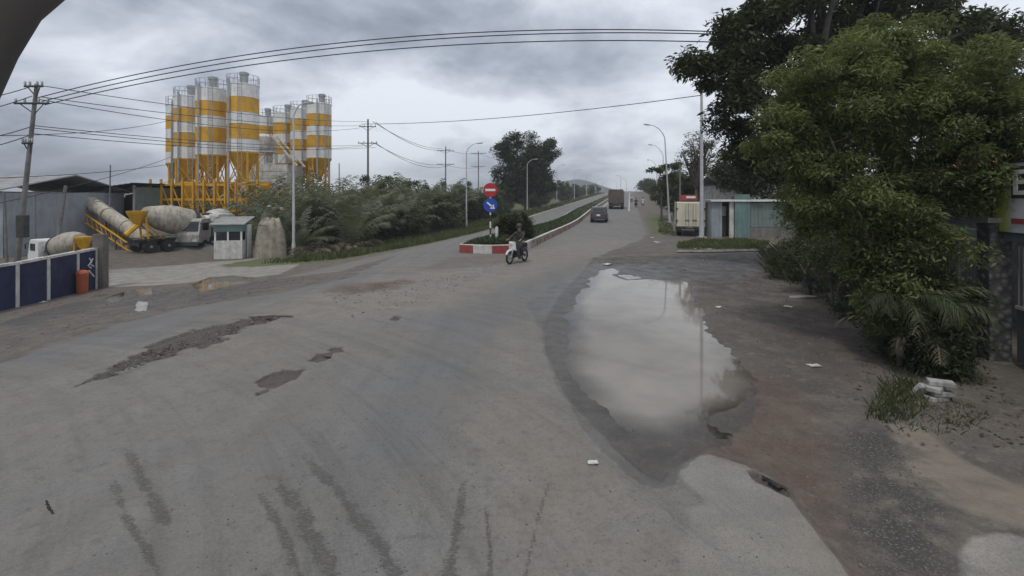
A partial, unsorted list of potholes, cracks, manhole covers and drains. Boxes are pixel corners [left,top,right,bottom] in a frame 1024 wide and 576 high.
pothole [731,464,807,509]
pothole [63,313,287,391]
pothole [300,351,341,366]
pothole [383,315,407,323]
pothole [321,345,350,357]
